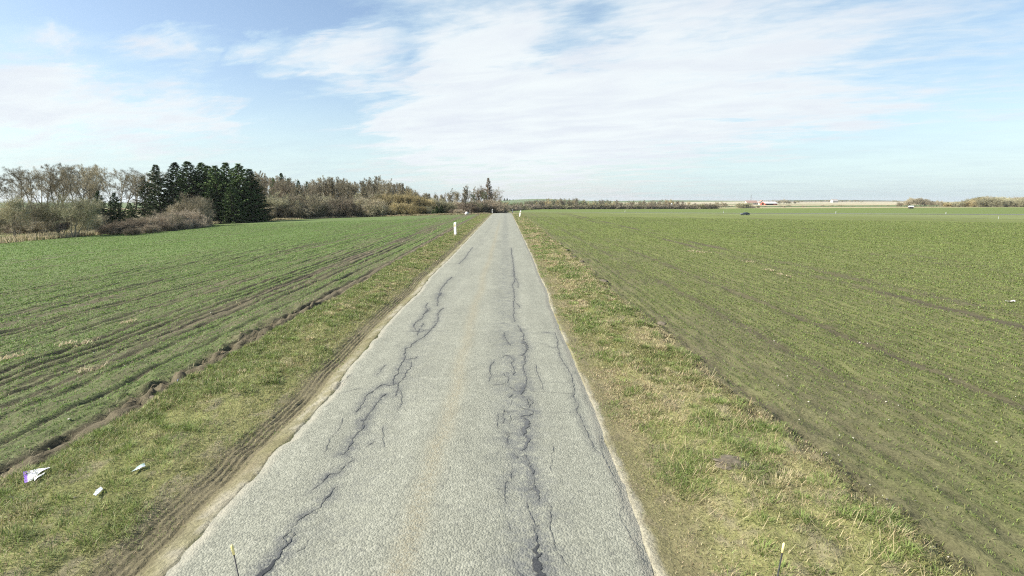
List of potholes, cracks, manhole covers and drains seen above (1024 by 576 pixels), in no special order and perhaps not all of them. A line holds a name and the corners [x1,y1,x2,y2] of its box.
crack [488,248,653,576]
crack [256,247,473,576]
